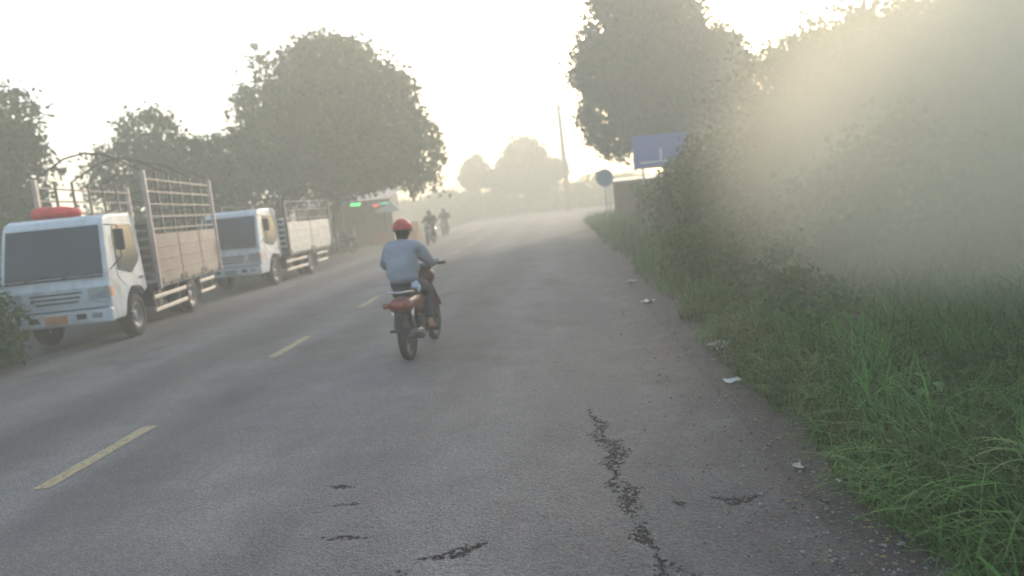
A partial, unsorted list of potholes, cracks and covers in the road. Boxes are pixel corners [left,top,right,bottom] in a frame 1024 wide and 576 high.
crack [379,542,488,576]
crack [329,485,360,507]
crack [710,494,758,506]
crack [586,409,701,576]
